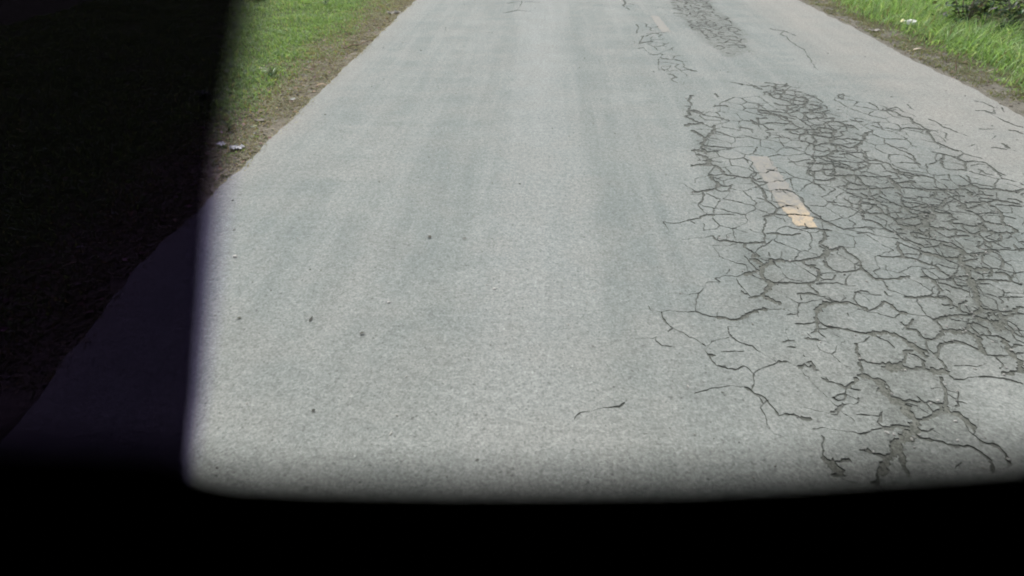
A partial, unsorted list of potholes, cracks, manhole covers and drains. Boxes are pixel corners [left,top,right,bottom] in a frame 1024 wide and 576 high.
crack [623,0,1024,462]
crack [574,402,625,420]
